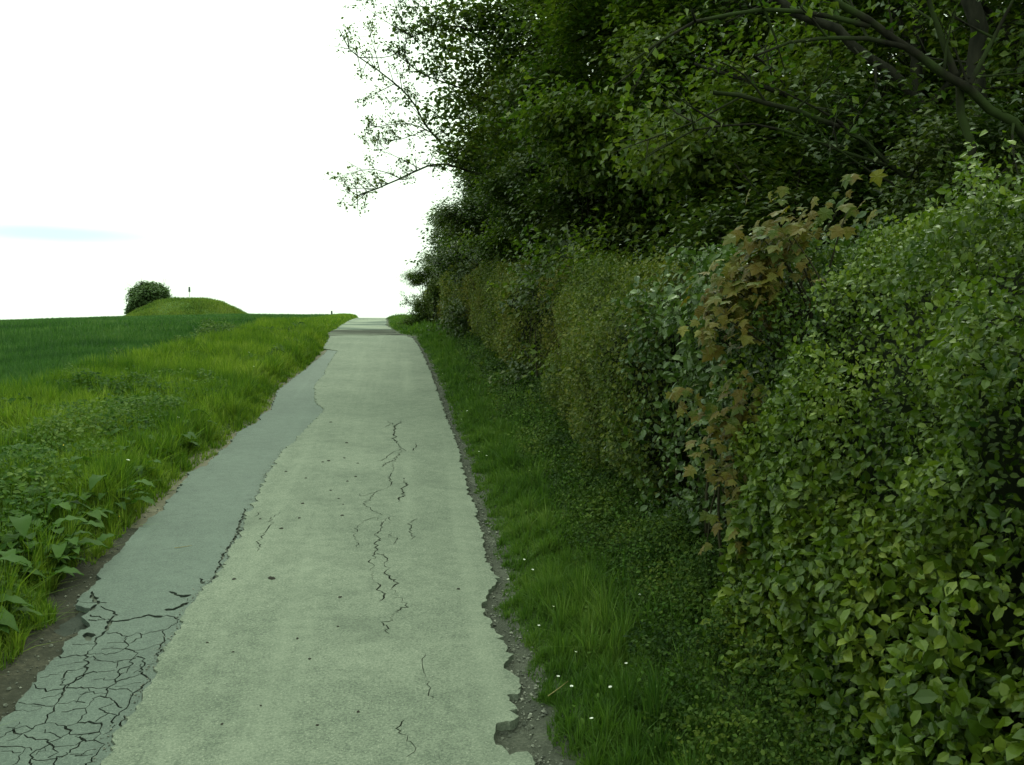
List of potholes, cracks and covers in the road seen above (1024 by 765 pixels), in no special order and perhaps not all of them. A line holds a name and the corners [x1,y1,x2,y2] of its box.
crack [1,509,269,765]
crack [353,422,417,634]
